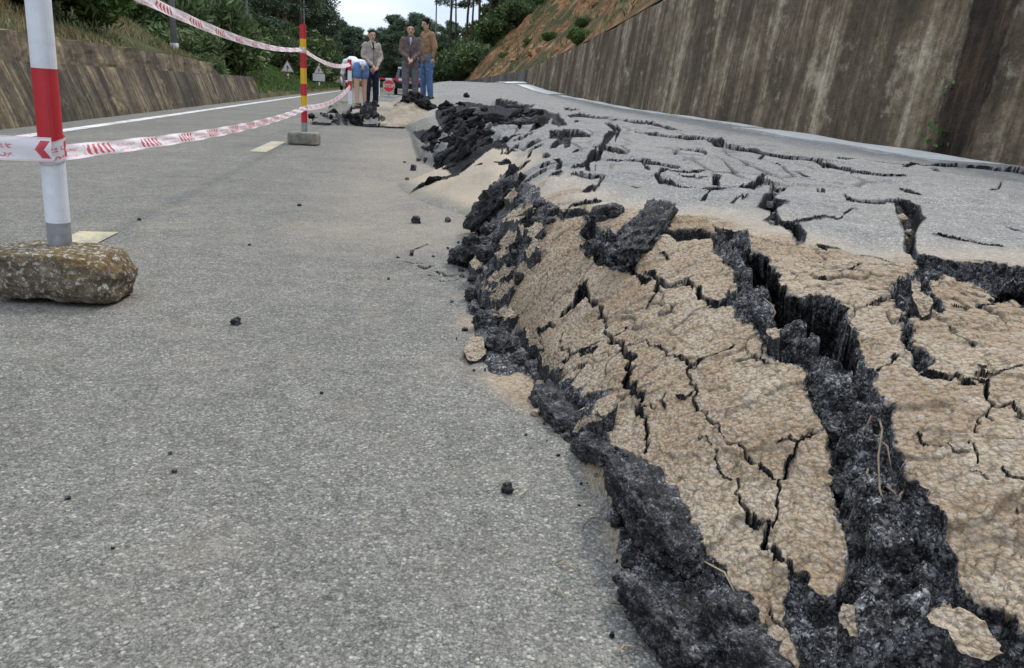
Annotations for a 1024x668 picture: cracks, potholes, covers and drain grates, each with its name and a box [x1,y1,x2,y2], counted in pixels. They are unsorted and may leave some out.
crack [496,98,1024,668]
